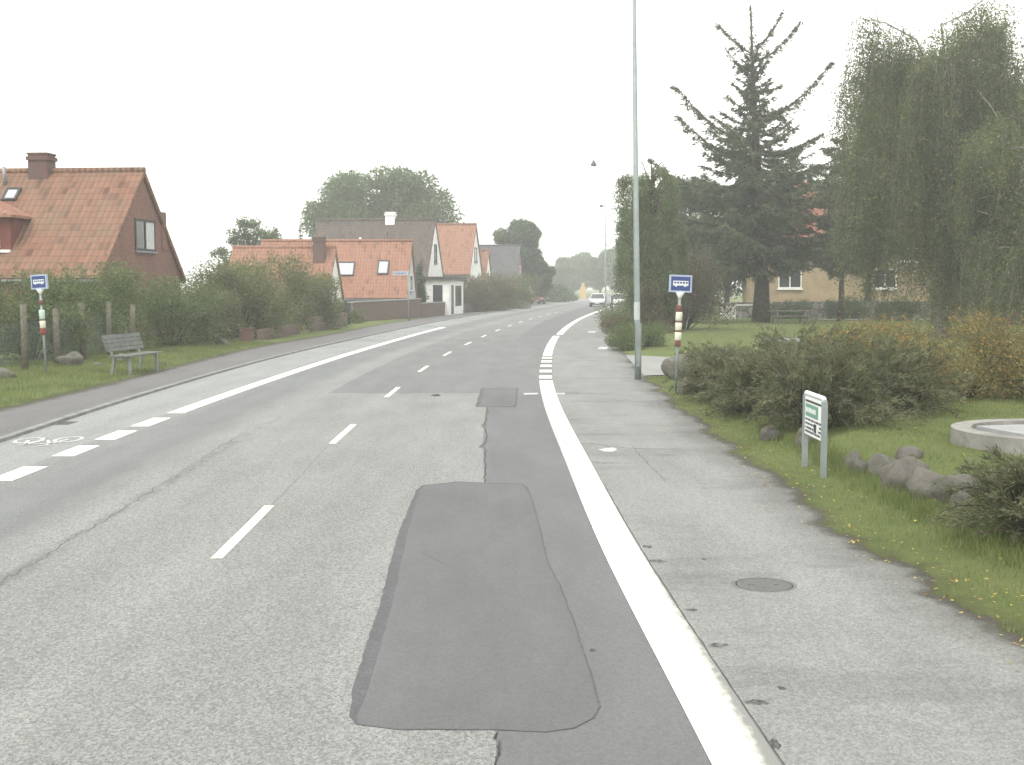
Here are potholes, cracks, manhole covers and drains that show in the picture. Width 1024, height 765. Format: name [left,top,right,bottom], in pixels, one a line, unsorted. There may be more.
crack [583,443,684,482]
manhole cover [731,577,797,593]
